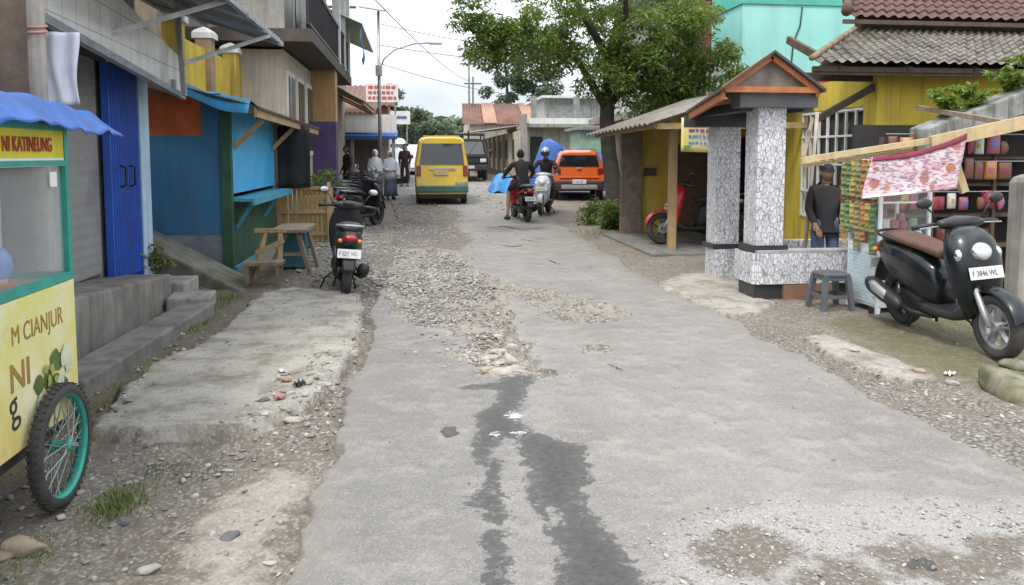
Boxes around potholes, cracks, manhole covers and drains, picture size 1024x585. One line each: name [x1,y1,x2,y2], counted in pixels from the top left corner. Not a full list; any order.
pothole [581,344,614,355]
pothole [900,557,938,571]
pothole [440,426,460,438]
pothole [361,246,560,378]
